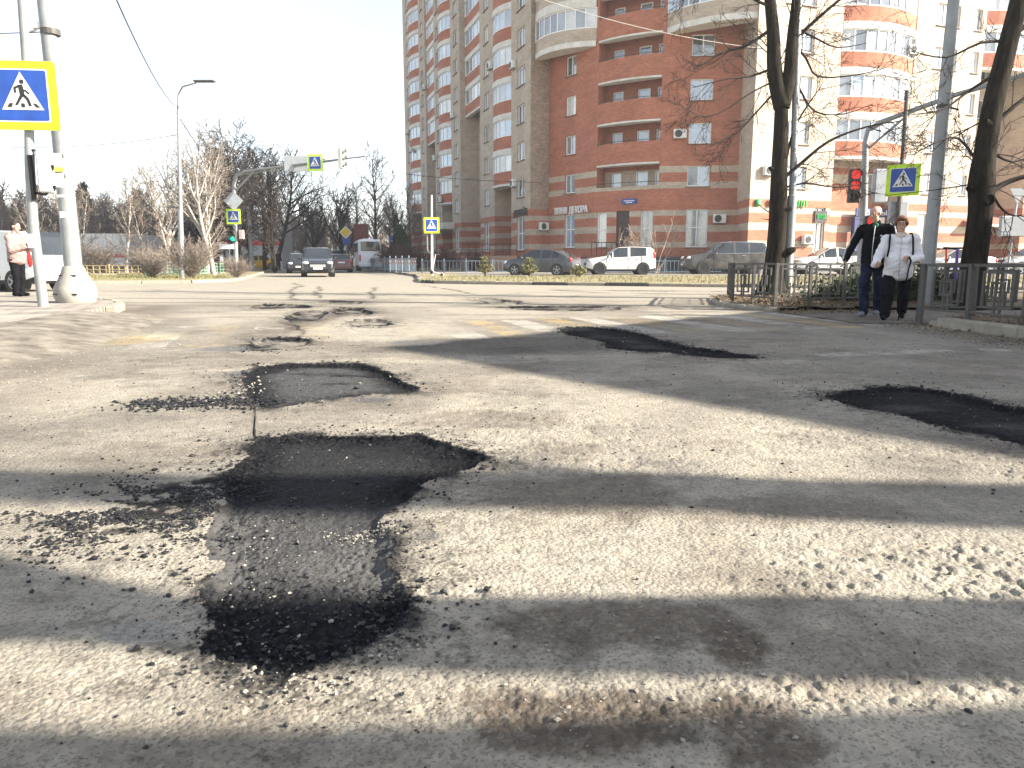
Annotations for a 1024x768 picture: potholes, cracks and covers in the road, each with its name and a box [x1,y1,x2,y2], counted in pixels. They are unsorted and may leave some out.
pothole [284,310,330,322]
pothole [246,337,313,351]
pothole [242,362,421,408]
pothole [350,318,395,328]
pothole [560,326,760,359]
pothole [825,386,1024,445]
pothole [198,433,490,679]
pothole [331,307,375,316]
